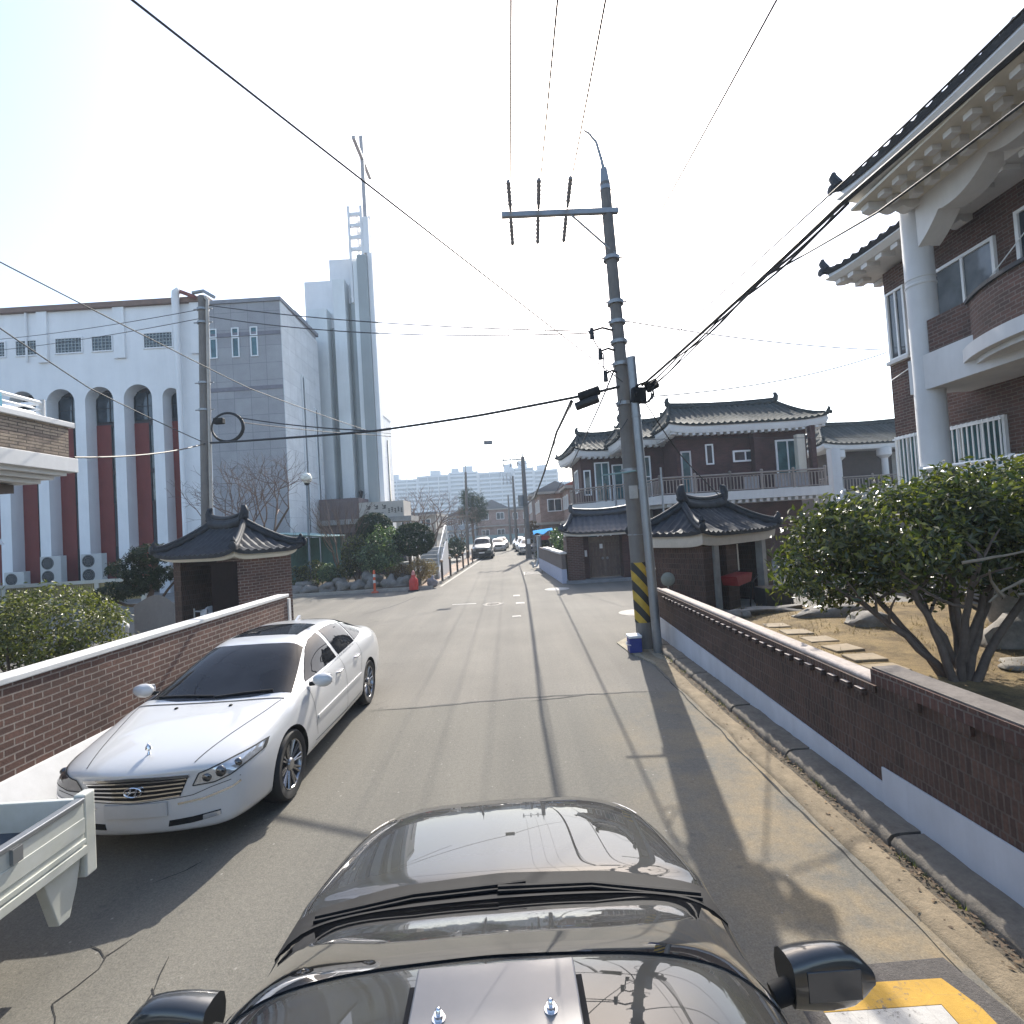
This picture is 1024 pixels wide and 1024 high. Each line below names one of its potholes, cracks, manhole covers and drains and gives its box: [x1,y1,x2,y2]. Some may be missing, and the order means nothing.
crack [145,957,169,1003]
crack [52,938,133,1024]
